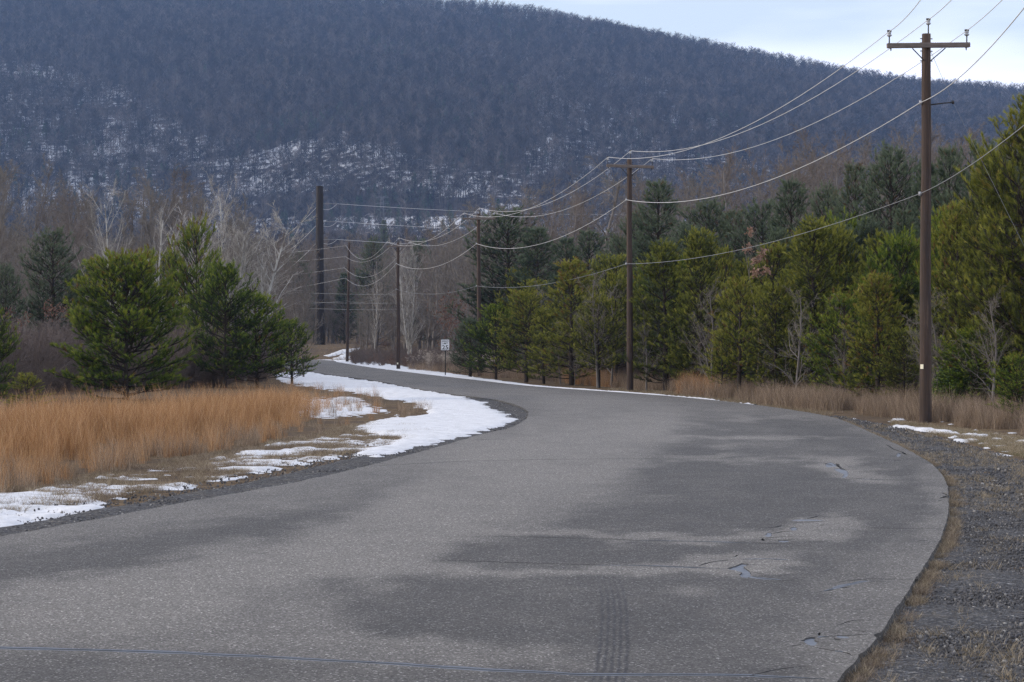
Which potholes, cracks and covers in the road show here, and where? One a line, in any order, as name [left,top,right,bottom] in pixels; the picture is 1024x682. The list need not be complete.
crack [815,579,918,593]
crack [793,620,880,656]
pothole [727,563,751,578]
crack [825,462,881,480]
crack [452,516,823,581]
